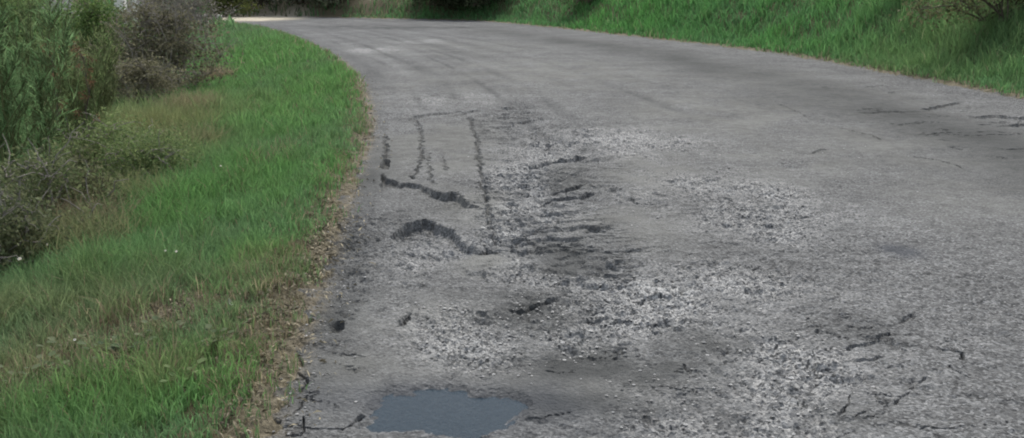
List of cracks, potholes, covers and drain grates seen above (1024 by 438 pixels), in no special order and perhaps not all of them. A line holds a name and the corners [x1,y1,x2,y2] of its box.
crack [812,85,1024,159]
pothole [353,383,534,438]
pothole [327,320,346,334]
crack [365,100,978,438]
crack [283,226,375,437]
